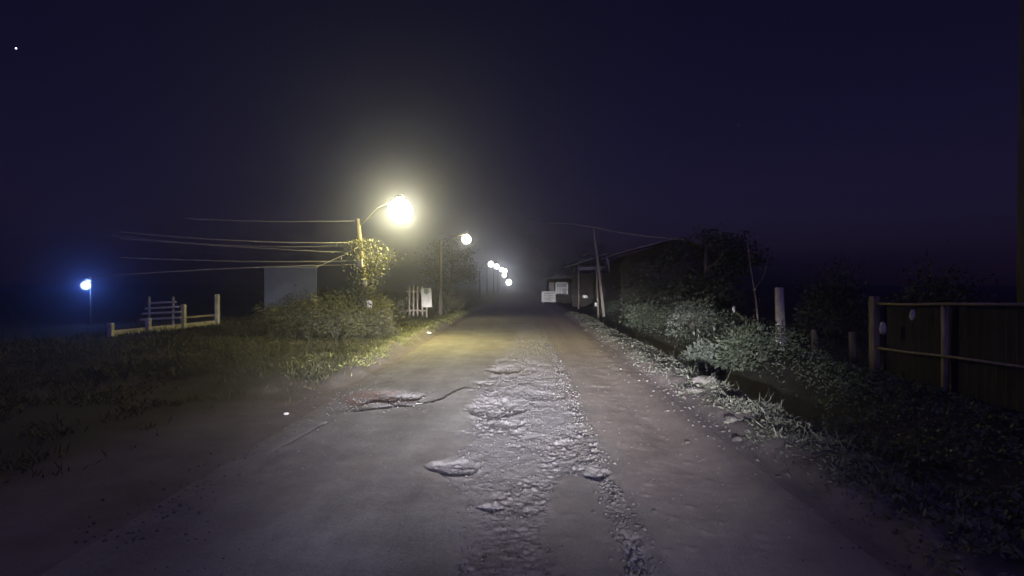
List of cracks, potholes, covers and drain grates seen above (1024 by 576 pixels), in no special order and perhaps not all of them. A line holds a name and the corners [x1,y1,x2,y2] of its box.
pothole [334,387,432,406]
pothole [421,451,492,478]
pothole [484,364,528,375]
pothole [467,500,513,516]
crack [357,323,595,576]
pothole [578,459,616,482]
